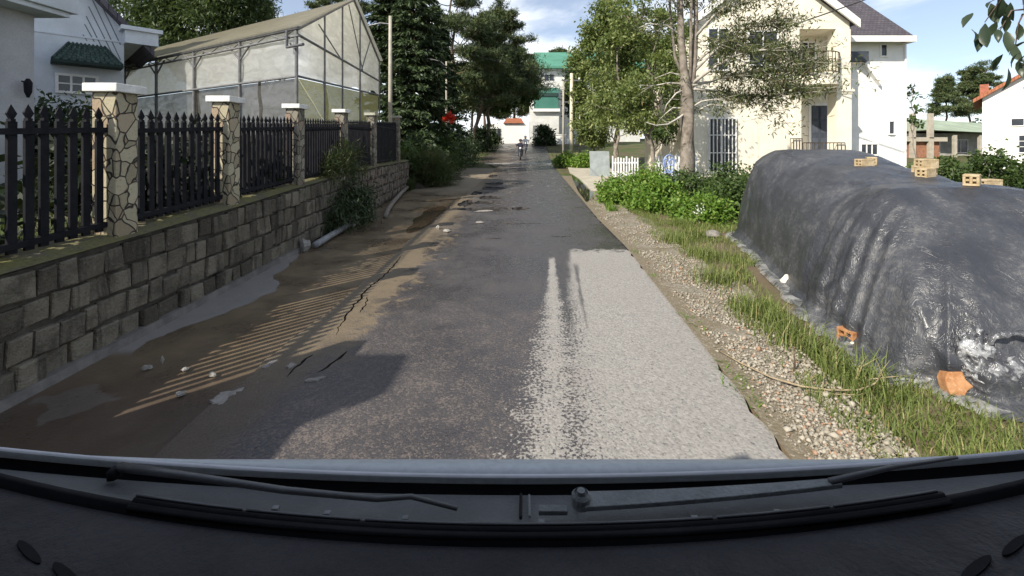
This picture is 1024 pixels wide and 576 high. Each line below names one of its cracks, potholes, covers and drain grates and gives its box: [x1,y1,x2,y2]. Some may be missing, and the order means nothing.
crack [287,351,347,377]
crack [336,256,401,334]
